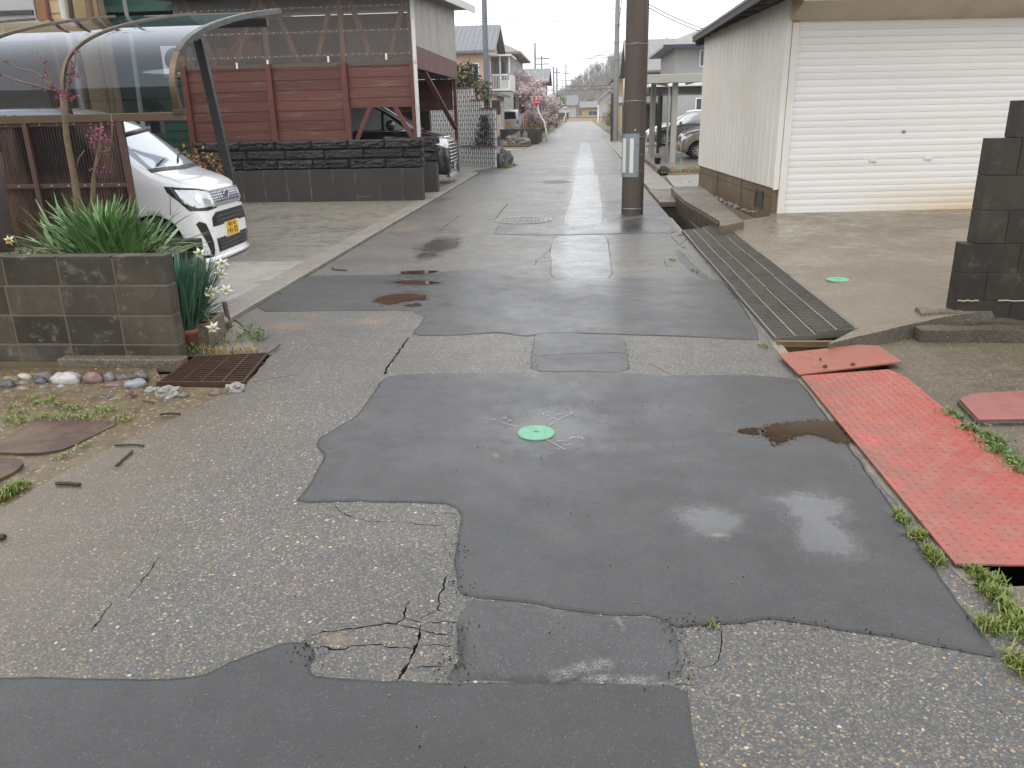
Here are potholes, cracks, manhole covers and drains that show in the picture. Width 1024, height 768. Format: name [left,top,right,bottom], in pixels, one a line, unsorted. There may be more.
drain grate [733,288,817,341]
drain grate [693,242,733,262]
drain grate [156,344,281,387]
drain grate [707,257,767,293]
crack [314,575,457,681]
manhole cover [494,216,553,224]
crack [384,330,410,375]
drain grate [682,228,718,245]
drain grate [758,276,858,339]
drain grate [703,226,760,257]
crack [90,556,161,634]
crack [697,629,723,671]
